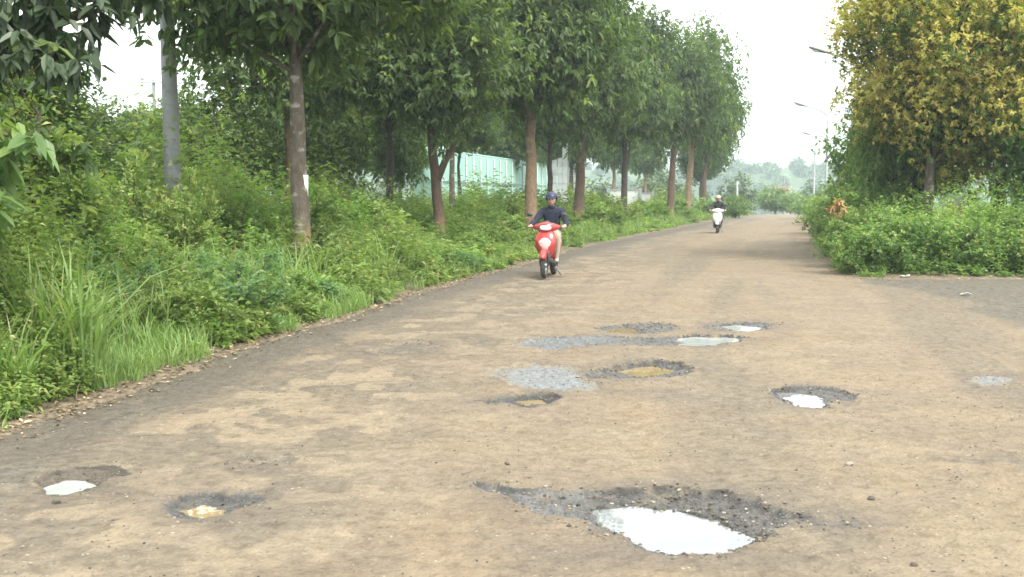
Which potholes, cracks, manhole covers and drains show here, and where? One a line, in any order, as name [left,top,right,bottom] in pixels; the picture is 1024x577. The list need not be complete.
pothole [703,322,773,332]
pothole [594,322,677,334]
pothole [31,465,132,497]
pothole [770,385,859,408]
pothole [473,481,861,558]
pothole [580,359,695,379]
pothole [514,334,751,350]
pothole [475,392,563,408]
pothole [163,492,266,520]
